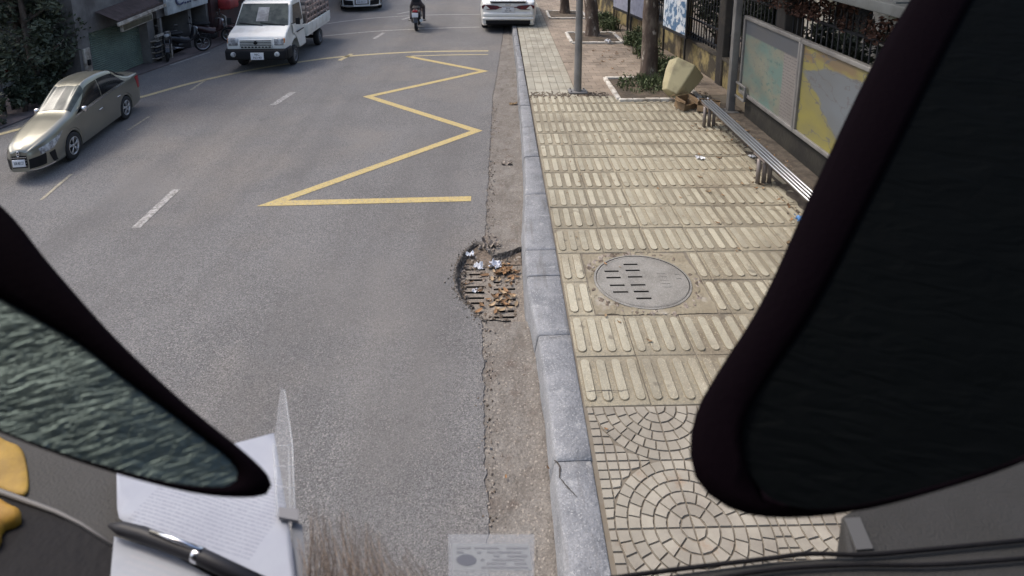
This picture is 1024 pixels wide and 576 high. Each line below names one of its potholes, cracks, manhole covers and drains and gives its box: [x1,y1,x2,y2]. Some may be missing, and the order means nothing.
manhole cover [594,255,692,310]
pothole [444,239,522,325]
